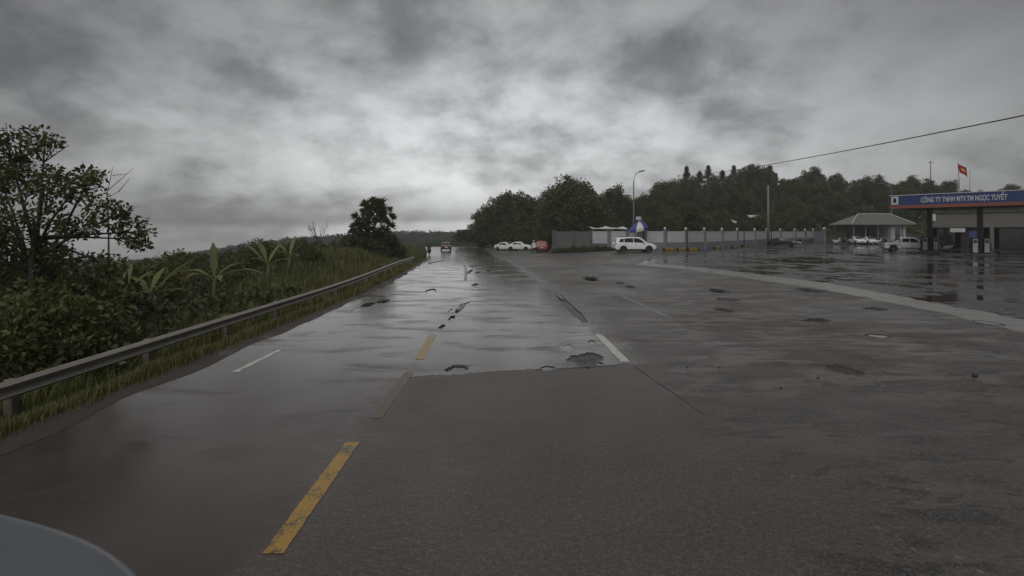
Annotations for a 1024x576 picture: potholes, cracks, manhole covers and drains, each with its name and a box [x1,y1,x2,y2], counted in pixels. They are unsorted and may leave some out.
pothole [823,363,865,375]
pothole [566,352,604,368]
